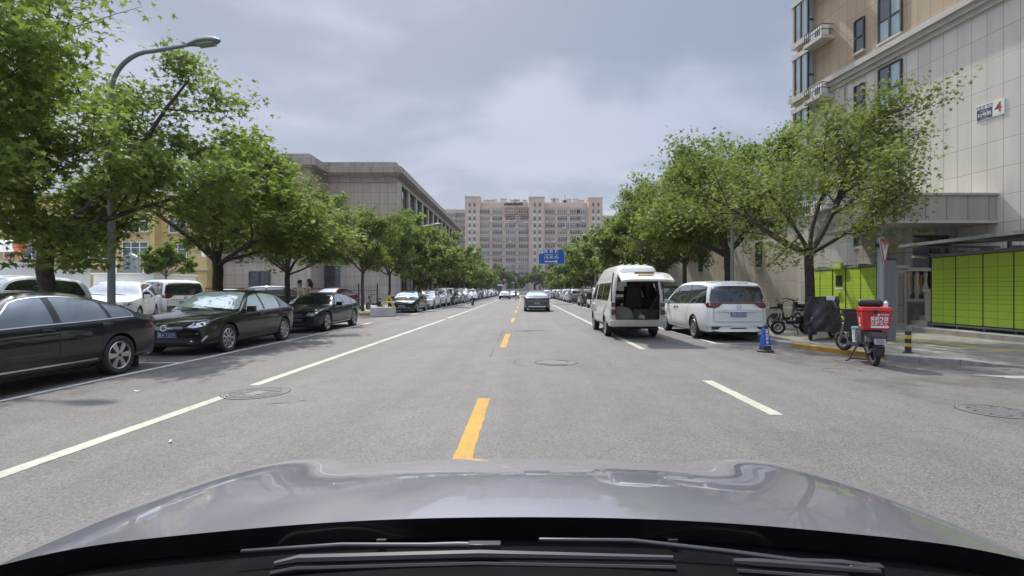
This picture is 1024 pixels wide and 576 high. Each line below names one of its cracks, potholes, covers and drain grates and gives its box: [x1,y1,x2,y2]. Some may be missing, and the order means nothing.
manhole cover [954,404,1024,419]
manhole cover [219,387,290,400]
